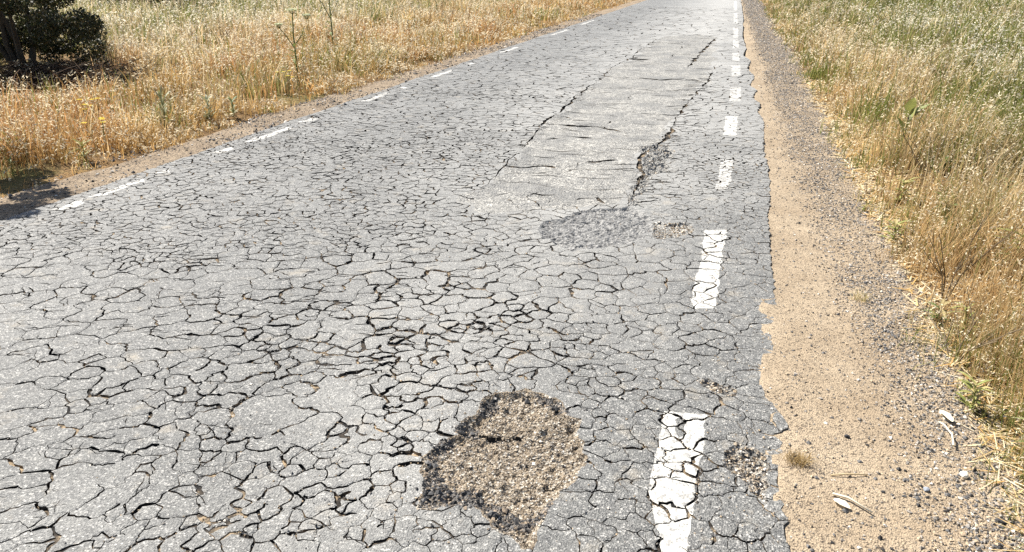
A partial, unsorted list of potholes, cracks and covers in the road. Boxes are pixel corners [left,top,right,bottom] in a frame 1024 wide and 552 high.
pothole [651,222,694,239]
pothole [626,143,676,206]
pothole [723,442,771,503]
pothole [416,388,588,550]
crack [0,7,789,552]
